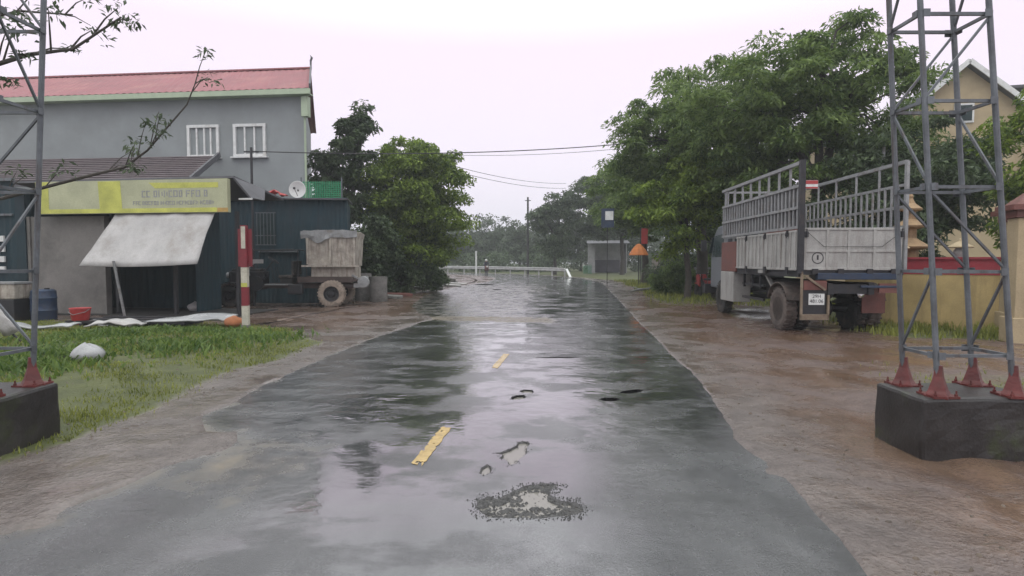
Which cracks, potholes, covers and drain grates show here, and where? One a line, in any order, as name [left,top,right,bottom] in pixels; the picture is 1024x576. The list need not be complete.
pothole [495,440,532,466]
pothole [479,464,494,476]
pothole [467,482,593,524]
